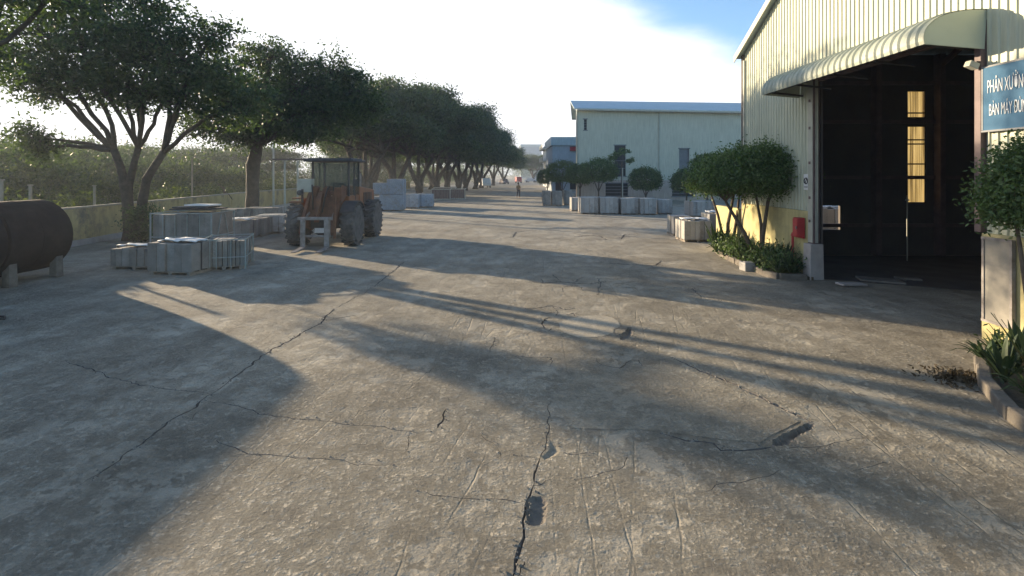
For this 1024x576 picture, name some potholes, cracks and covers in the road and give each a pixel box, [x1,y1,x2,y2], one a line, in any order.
crack [66,261,432,485]
pothole [619,327,635,341]
crack [693,471,777,494]
pothole [769,421,819,448]
crack [416,402,594,576]
pothole [542,442,565,462]
pothole [517,496,553,526]
